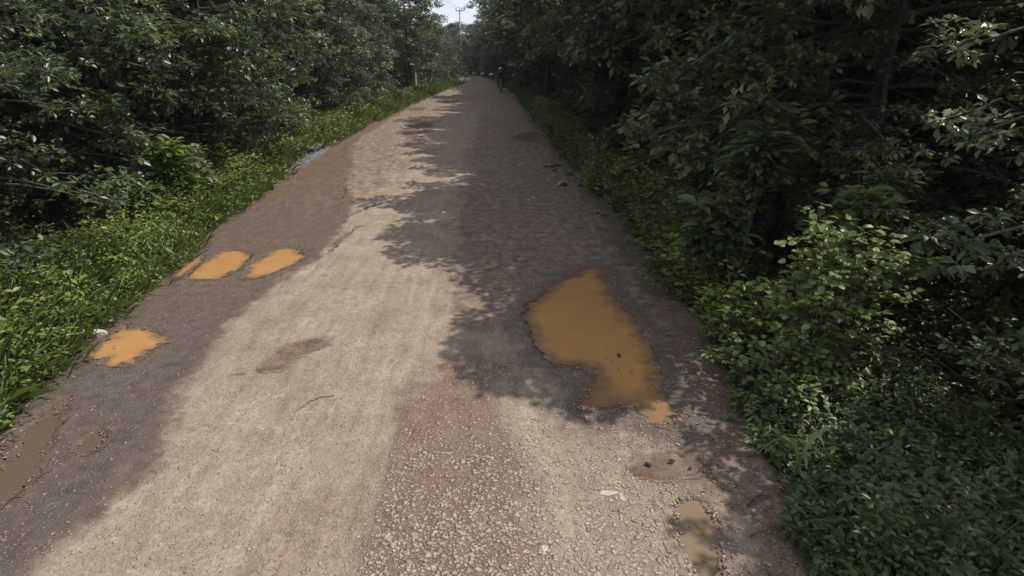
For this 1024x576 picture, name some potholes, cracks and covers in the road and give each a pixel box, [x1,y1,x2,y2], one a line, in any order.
pothole [661,492,738,576]
pothole [183,248,255,280]
pothole [0,393,82,510]
pothole [84,321,174,368]
crack [310,187,389,258]
pothole [518,265,687,430]
crack [285,392,341,417]
pothole [626,447,720,484]
pothole [237,247,313,280]
